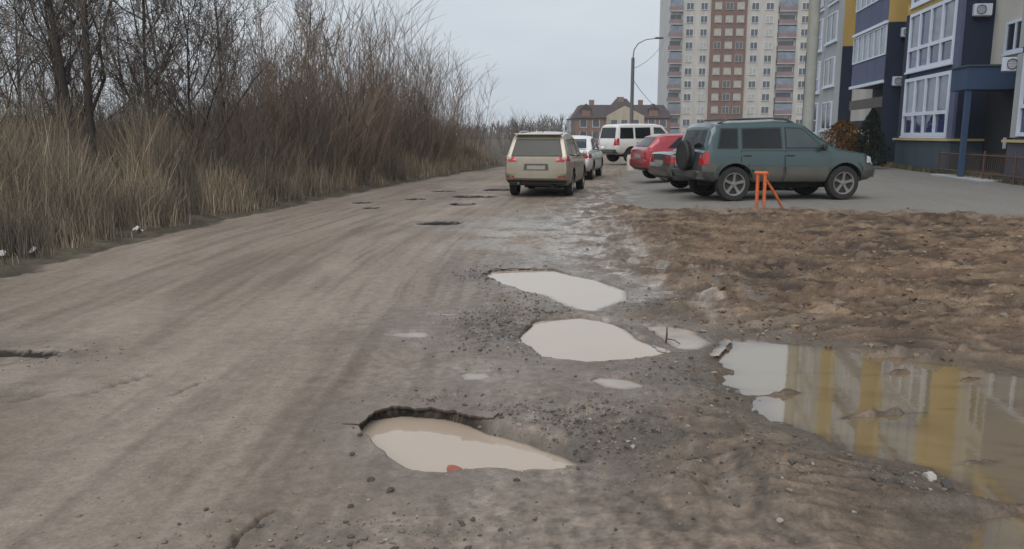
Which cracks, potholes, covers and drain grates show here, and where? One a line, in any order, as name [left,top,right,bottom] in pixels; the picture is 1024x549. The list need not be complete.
pothole [631,321,731,359]
pothole [472,266,640,313]
pothole [510,312,682,364]
pothole [340,399,613,479]
